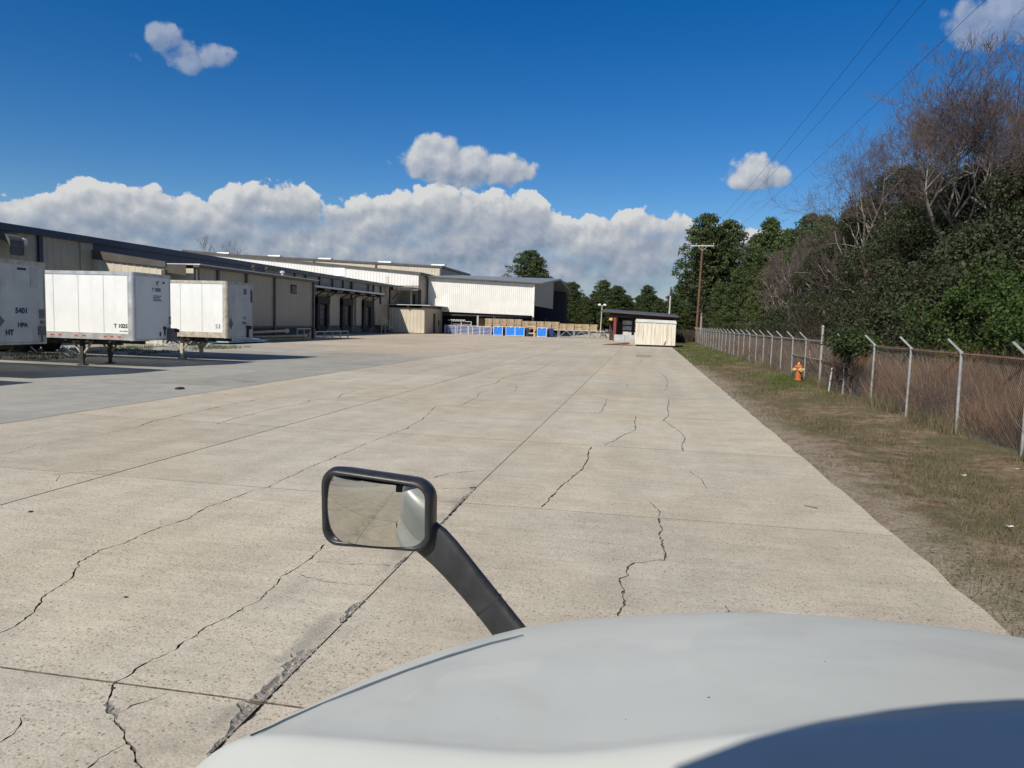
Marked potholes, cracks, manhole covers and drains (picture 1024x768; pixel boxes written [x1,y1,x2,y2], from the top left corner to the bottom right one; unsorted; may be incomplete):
crack [660,373,686,451]
crack [541,417,636,507]
crack [617,502,667,616]
crack [0,363,549,633]
crack [88,544,391,768]
